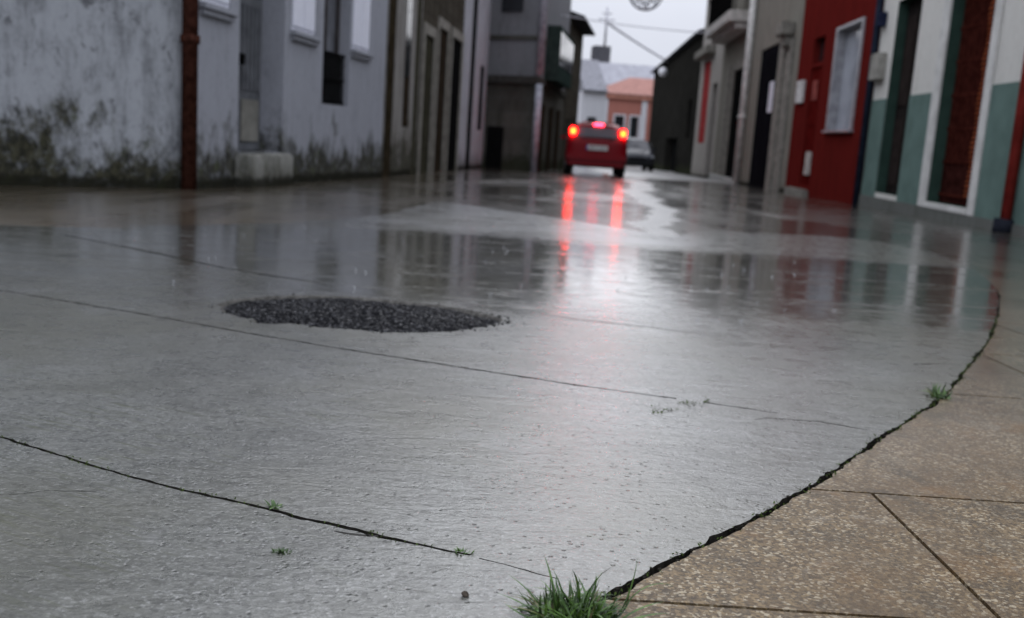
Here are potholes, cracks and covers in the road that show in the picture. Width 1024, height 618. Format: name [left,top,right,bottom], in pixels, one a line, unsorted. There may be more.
crack [0,289,1001,601]
